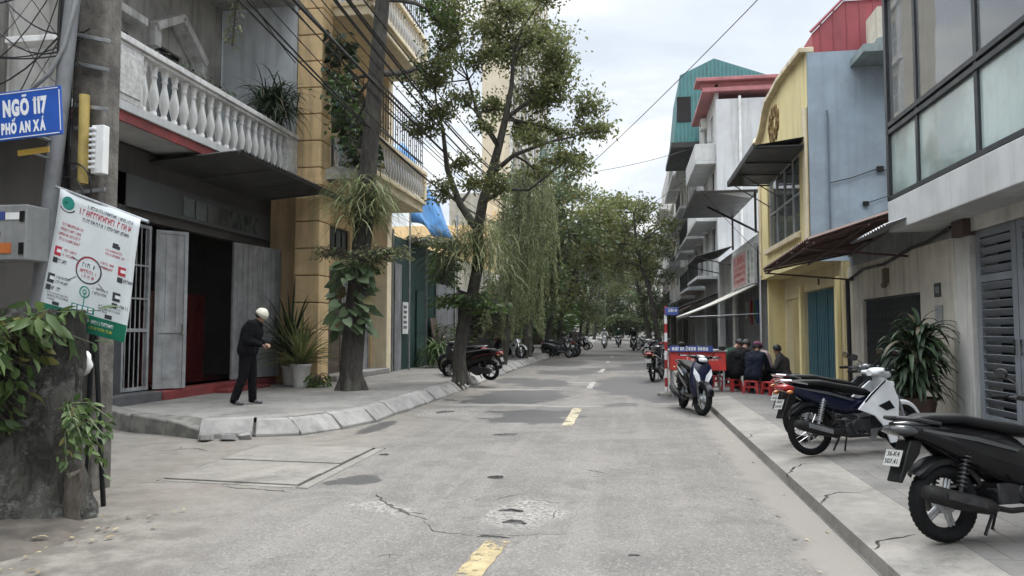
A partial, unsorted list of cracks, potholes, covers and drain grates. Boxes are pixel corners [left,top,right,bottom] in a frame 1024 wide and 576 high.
manhole cover [157,445,386,489]
crack [375,494,556,536]
